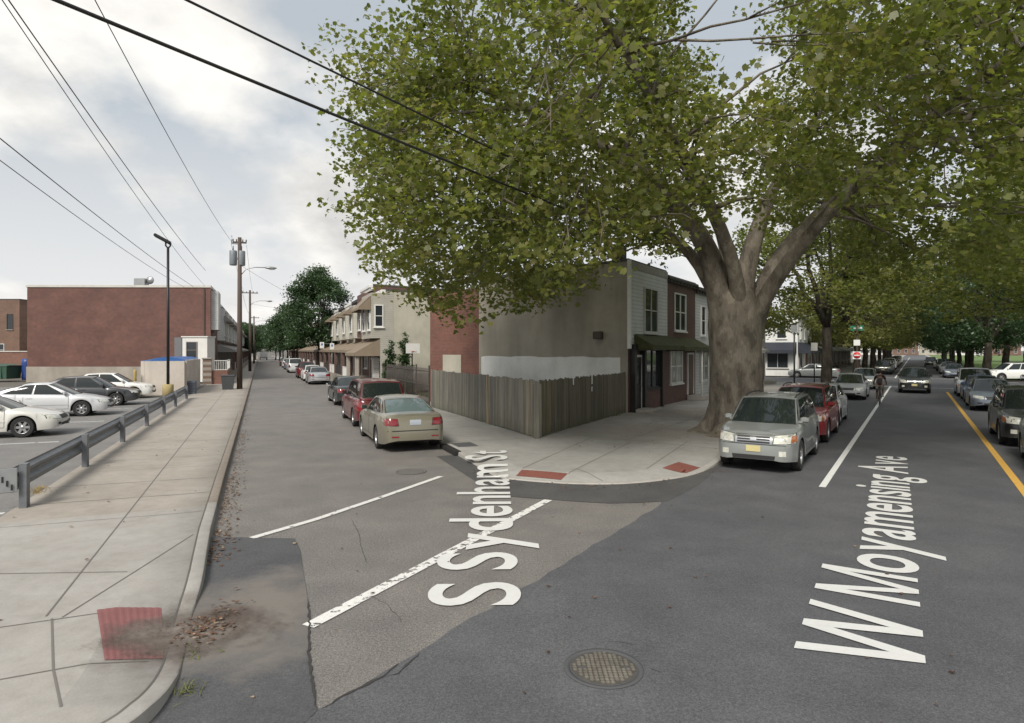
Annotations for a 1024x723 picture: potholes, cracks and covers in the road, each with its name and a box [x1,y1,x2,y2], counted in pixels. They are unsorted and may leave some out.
manhole cover [564,648,644,689]
